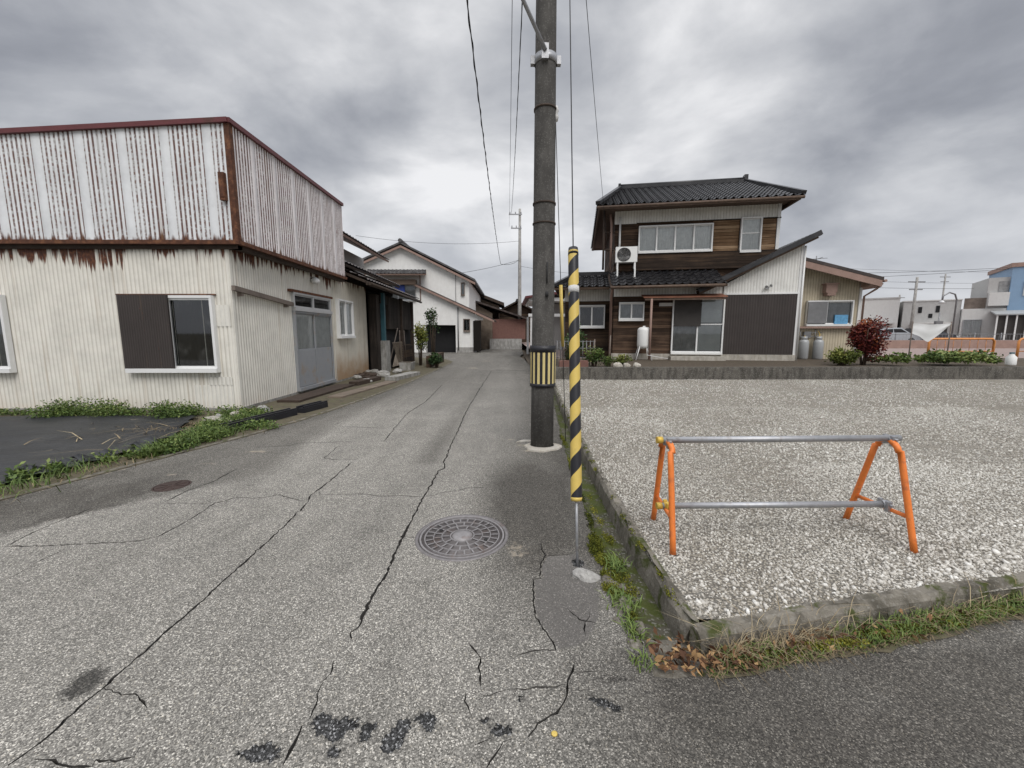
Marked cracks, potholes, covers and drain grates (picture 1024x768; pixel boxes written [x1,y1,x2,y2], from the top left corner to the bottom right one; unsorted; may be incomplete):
manhole cover [151,480,192,492]
manhole cover [415,514,509,562]
crack [1,442,356,768]
crack [464,545,599,768]
